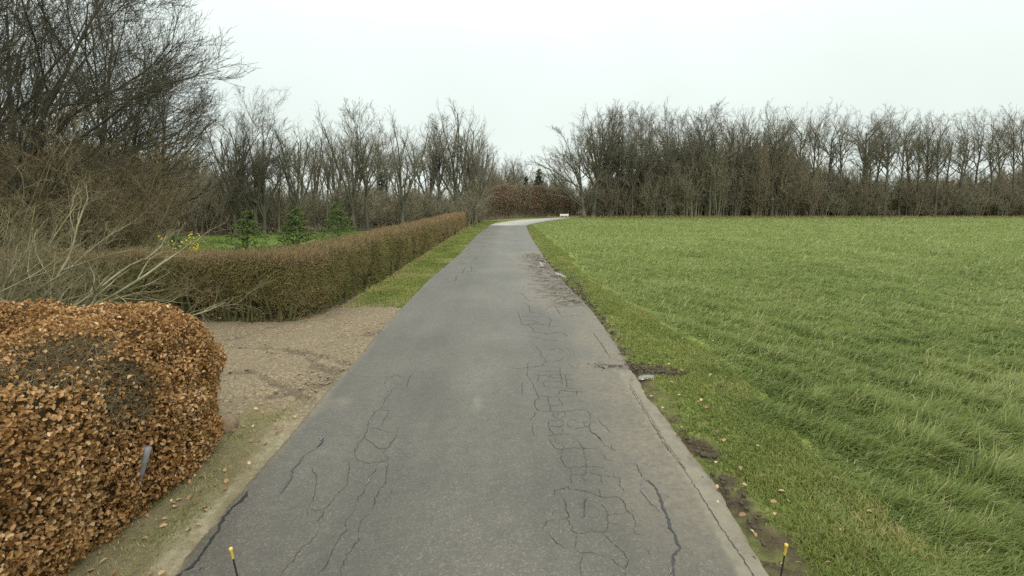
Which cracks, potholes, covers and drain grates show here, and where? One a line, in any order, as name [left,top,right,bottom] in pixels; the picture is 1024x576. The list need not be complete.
crack [518,293,650,576]
crack [283,362,411,574]
